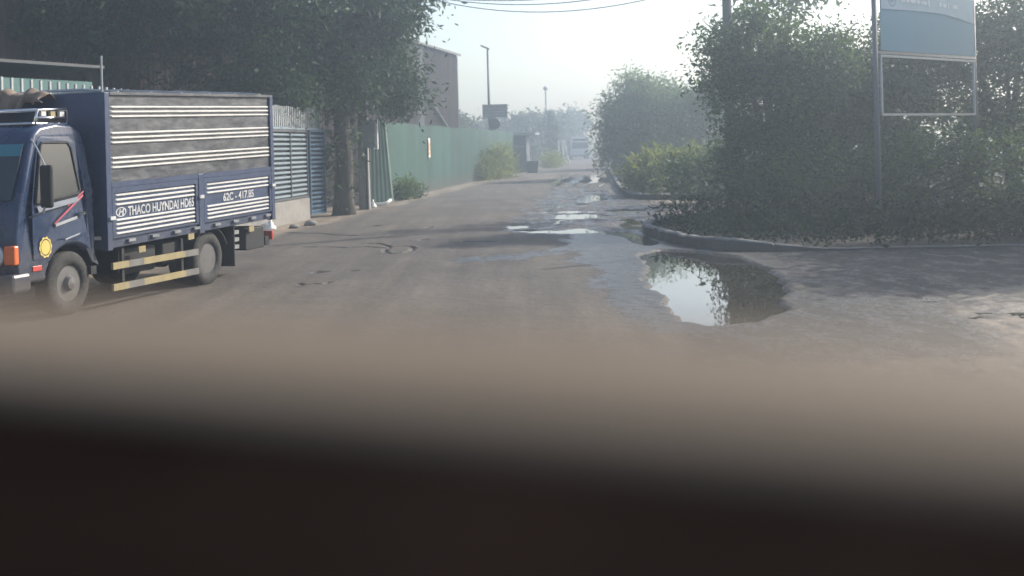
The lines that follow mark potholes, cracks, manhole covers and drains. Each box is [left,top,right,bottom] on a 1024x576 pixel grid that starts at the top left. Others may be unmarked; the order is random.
pothole [632,248,801,327]
crack [282,232,419,254]
pothole [546,173,611,187]
